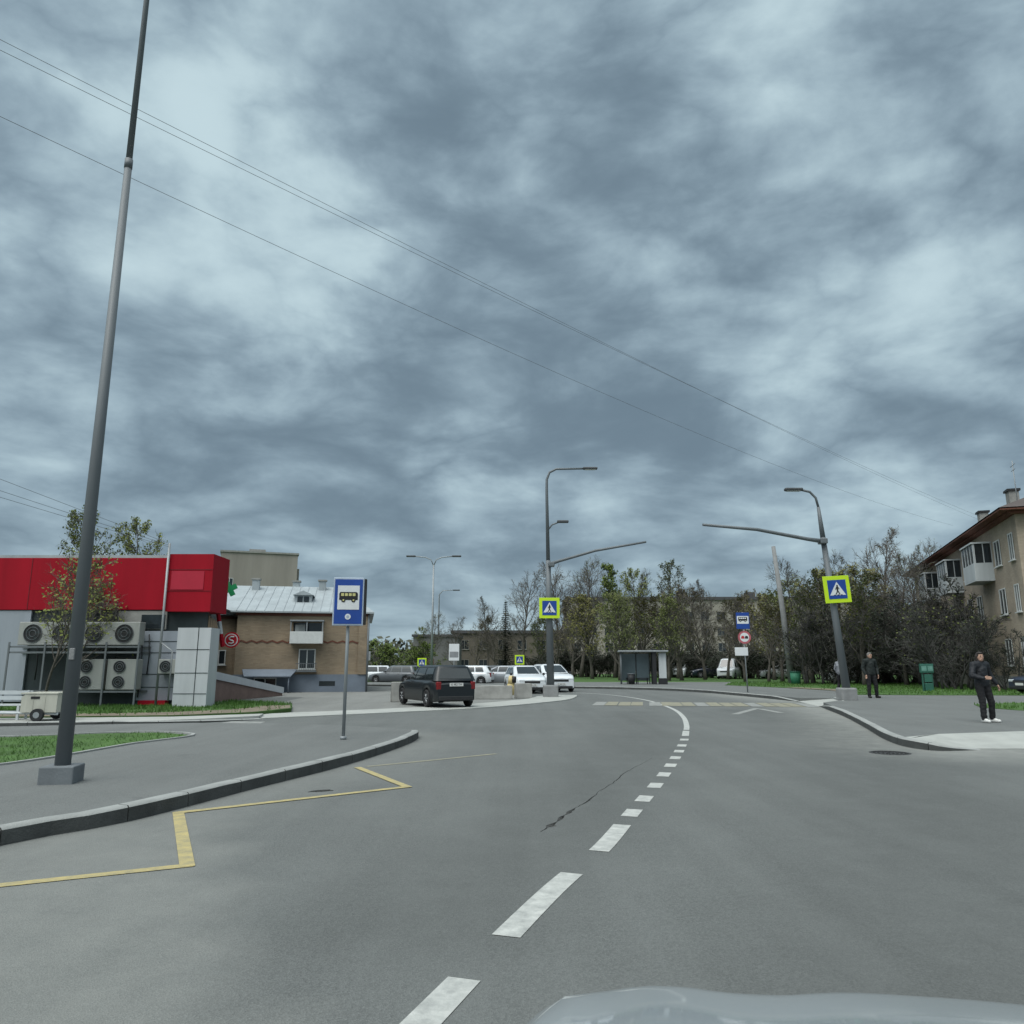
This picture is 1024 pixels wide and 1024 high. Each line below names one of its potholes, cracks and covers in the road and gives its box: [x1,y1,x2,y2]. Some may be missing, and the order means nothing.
crack [541,760,648,832]
